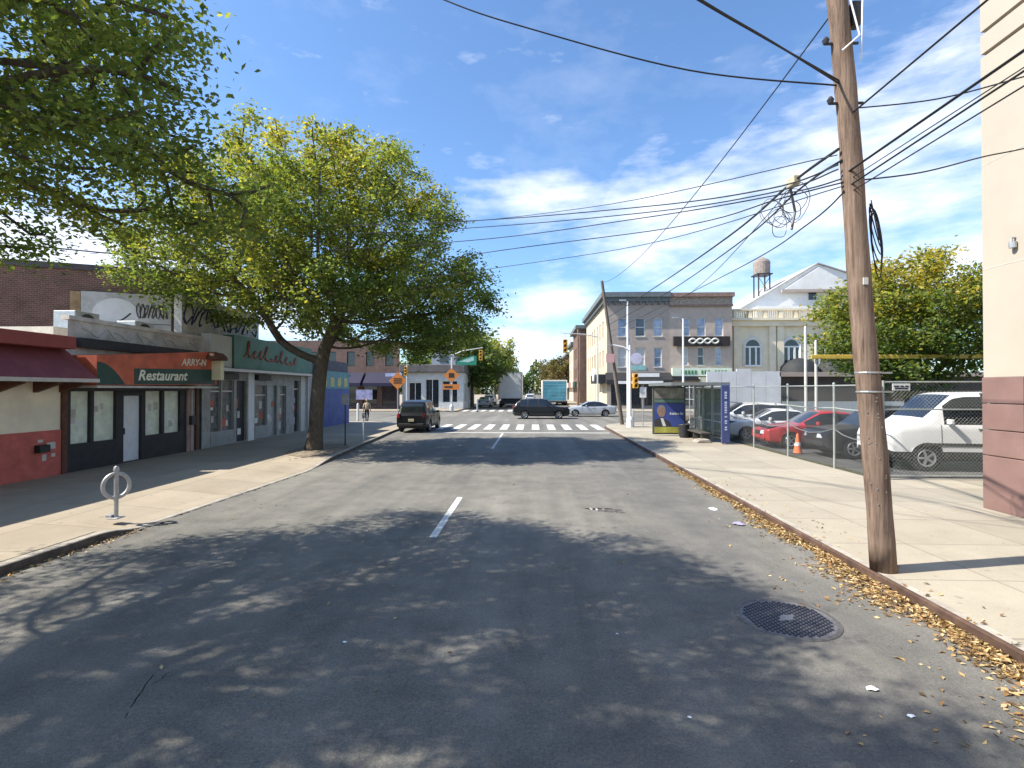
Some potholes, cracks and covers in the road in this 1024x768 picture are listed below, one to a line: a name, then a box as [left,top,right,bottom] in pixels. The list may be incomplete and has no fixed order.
manhole cover [734,598,844,642]
crack [124,674,166,718]
